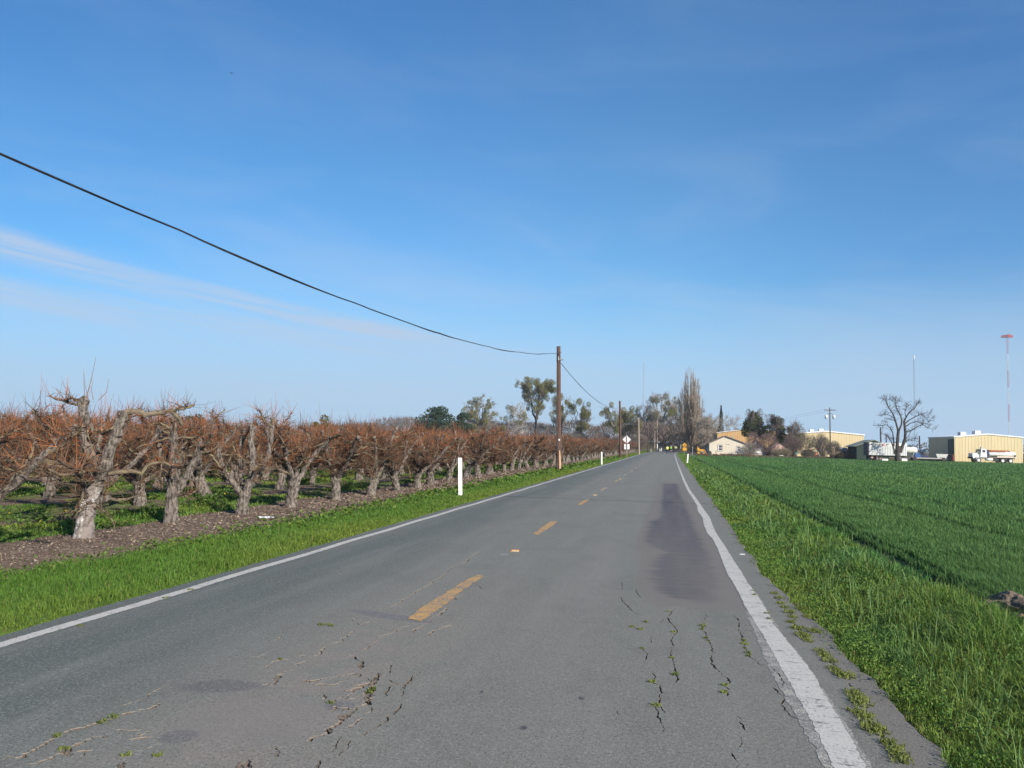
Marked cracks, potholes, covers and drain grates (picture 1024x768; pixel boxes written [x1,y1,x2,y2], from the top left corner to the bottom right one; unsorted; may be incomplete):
crack [3,684,166,764]
crack [701,615,797,719]
crack [260,552,482,757]
crack [621,588,679,732]
